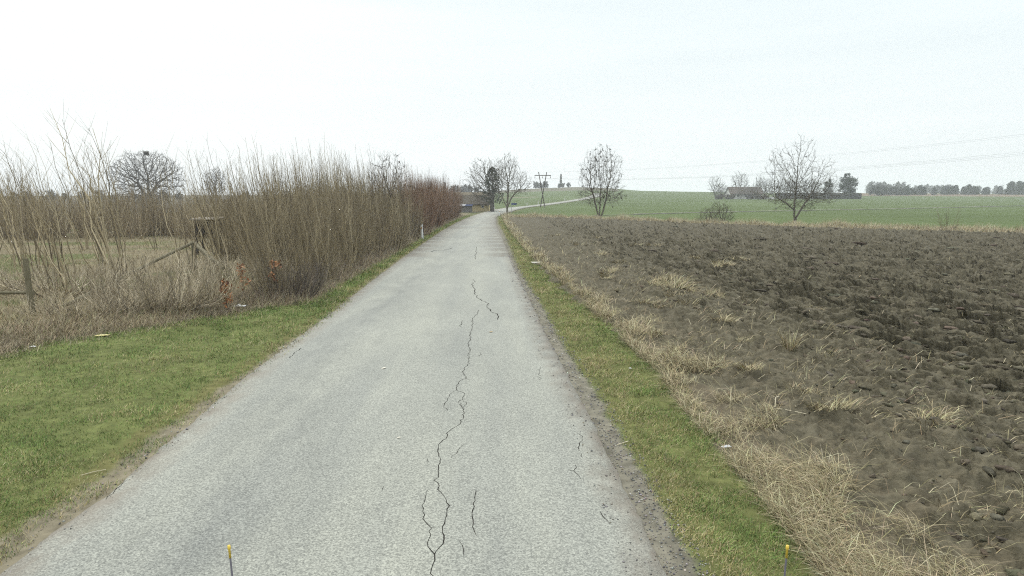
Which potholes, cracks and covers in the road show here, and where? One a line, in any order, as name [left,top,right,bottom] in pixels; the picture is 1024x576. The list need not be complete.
crack [422,310,480,576]
